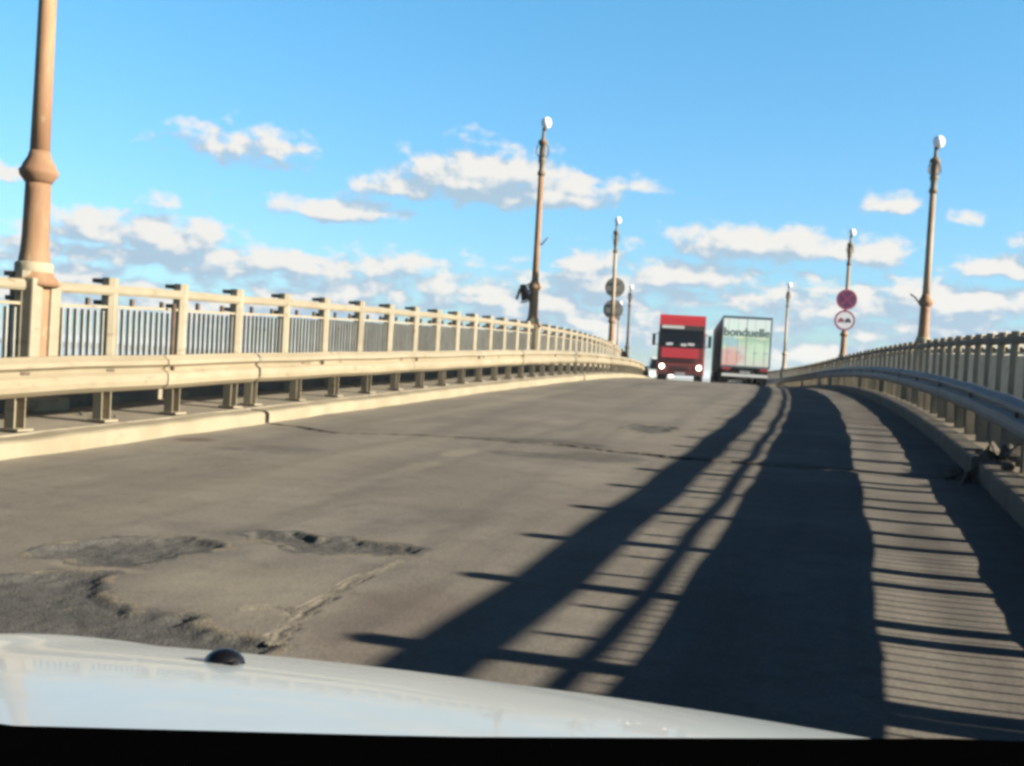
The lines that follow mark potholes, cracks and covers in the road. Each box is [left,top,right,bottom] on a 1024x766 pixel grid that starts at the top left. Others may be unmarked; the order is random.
crack [267,423,962,481]
pothole [0,568,298,657]
crack [235,560,404,646]
pothole [226,529,435,557]
pothole [15,534,238,568]
